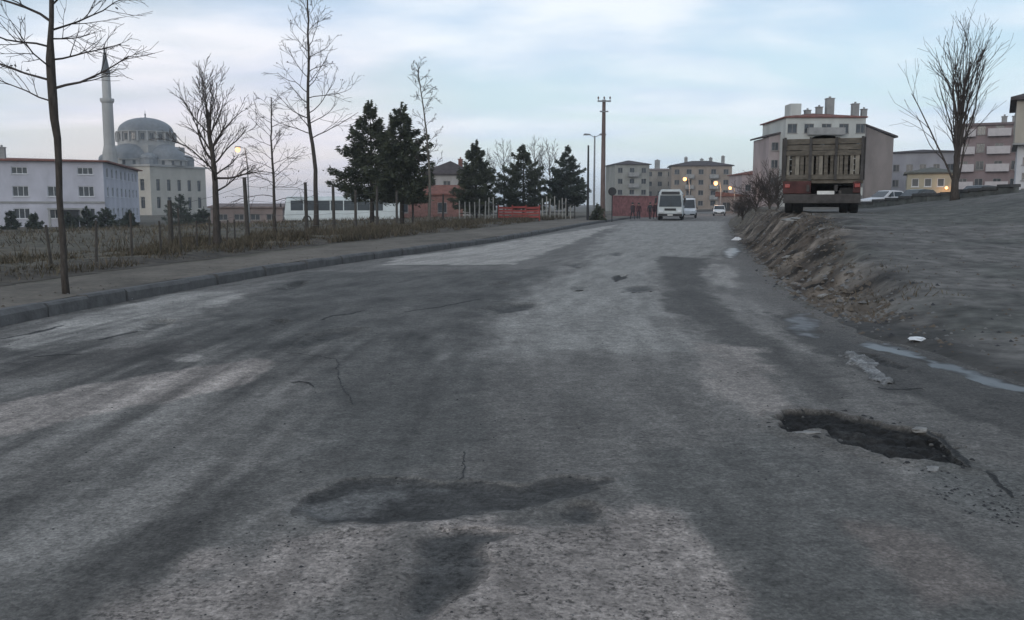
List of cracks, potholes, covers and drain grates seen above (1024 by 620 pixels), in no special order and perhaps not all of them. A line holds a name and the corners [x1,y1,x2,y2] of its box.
pothole [753,405,997,475]
crack [406,299,479,312]
crack [286,352,353,404]
crack [927,431,1014,497]
crack [2,325,80,357]
